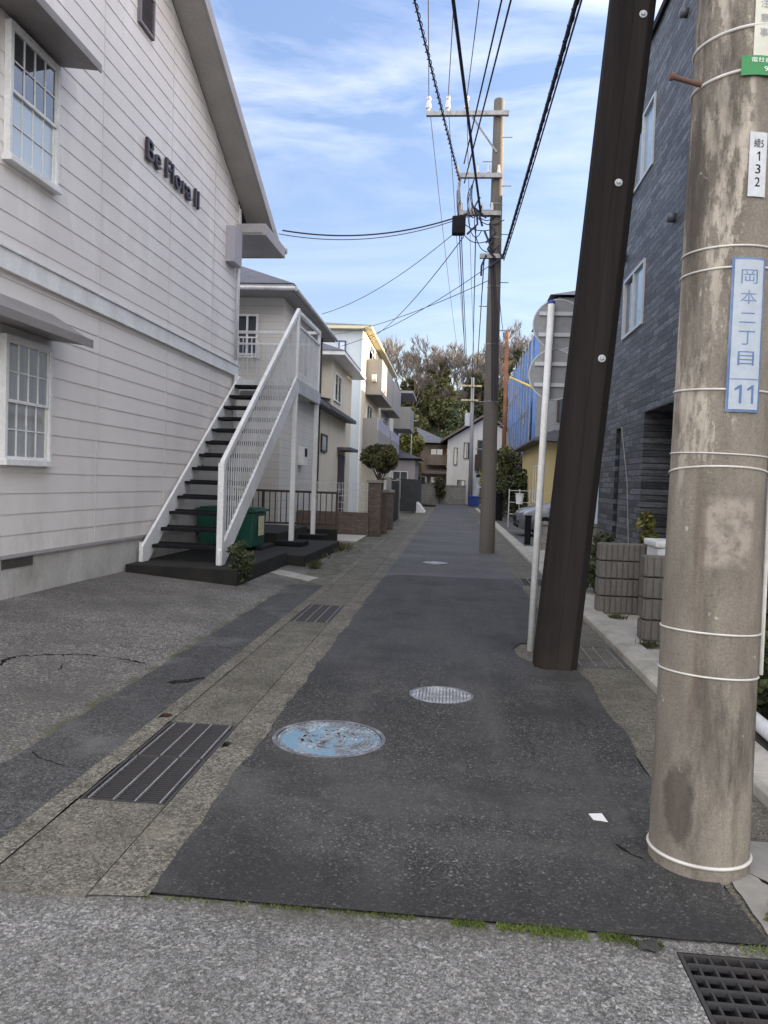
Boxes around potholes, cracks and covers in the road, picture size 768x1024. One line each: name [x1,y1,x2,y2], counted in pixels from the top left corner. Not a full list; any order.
drain grate [577,647,629,669]
crack [0,654,144,671]
drain grate [80,755,207,806]
drain grate [132,722,237,760]
crack [615,843,650,864]
drain grate [678,953,768,1024]
drain grate [302,604,344,614]
drain grate [291,612,337,623]
manhole cover [272,720,385,758]
manhole cover [409,686,473,704]
